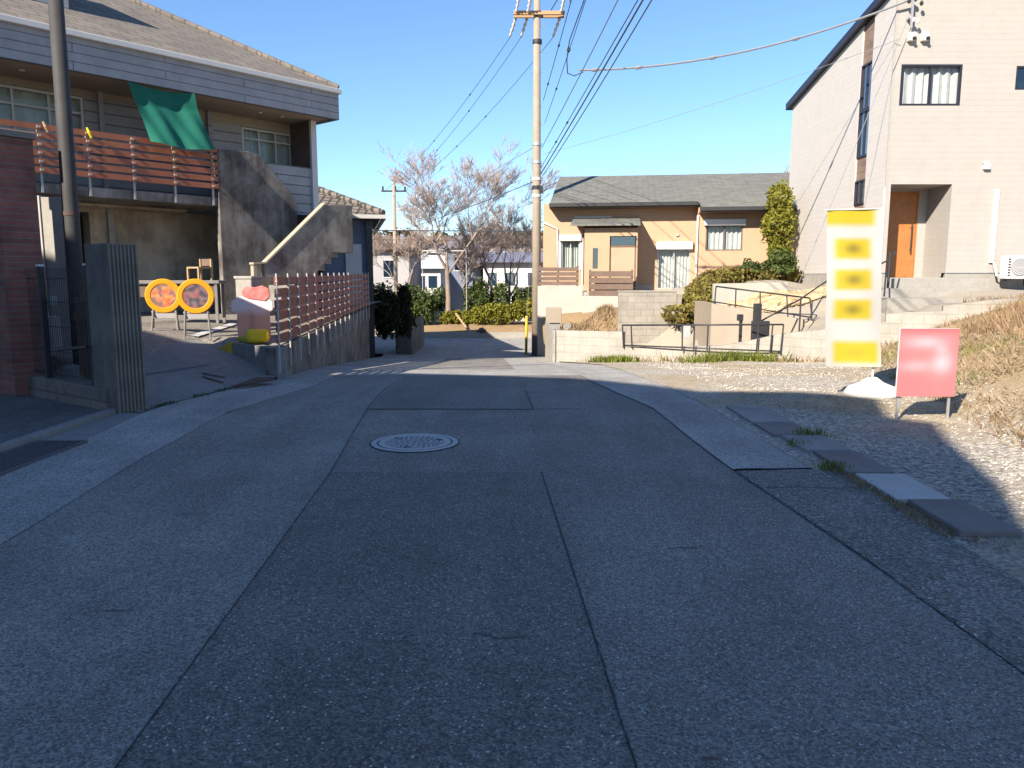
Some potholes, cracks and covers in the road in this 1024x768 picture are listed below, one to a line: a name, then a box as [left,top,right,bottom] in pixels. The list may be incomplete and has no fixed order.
manhole cover [370,433,460,453]
drain grate [0,440,88,475]
